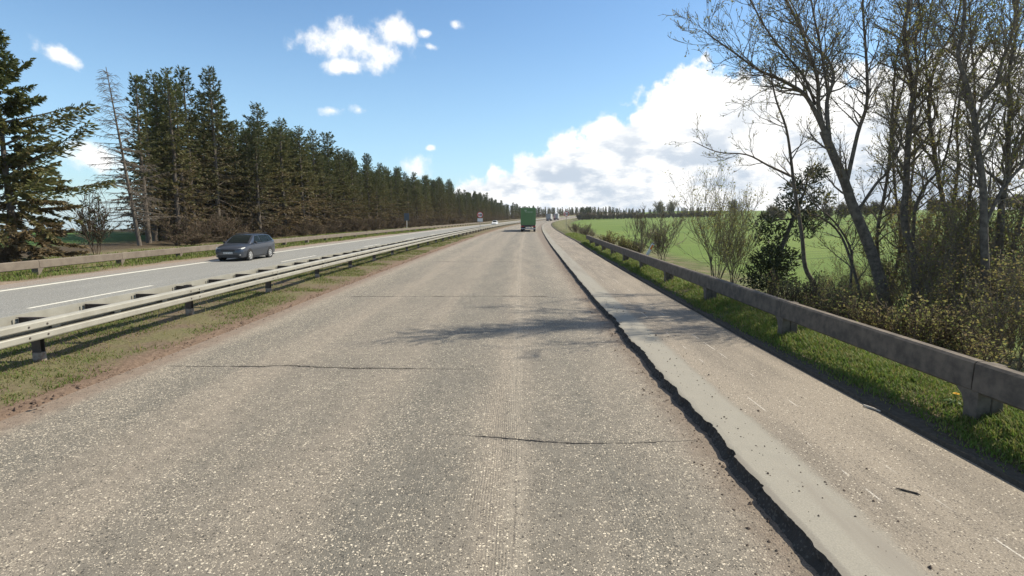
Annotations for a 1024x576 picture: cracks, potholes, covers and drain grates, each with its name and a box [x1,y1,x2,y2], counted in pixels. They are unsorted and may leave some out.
crack [451,434,675,444]
